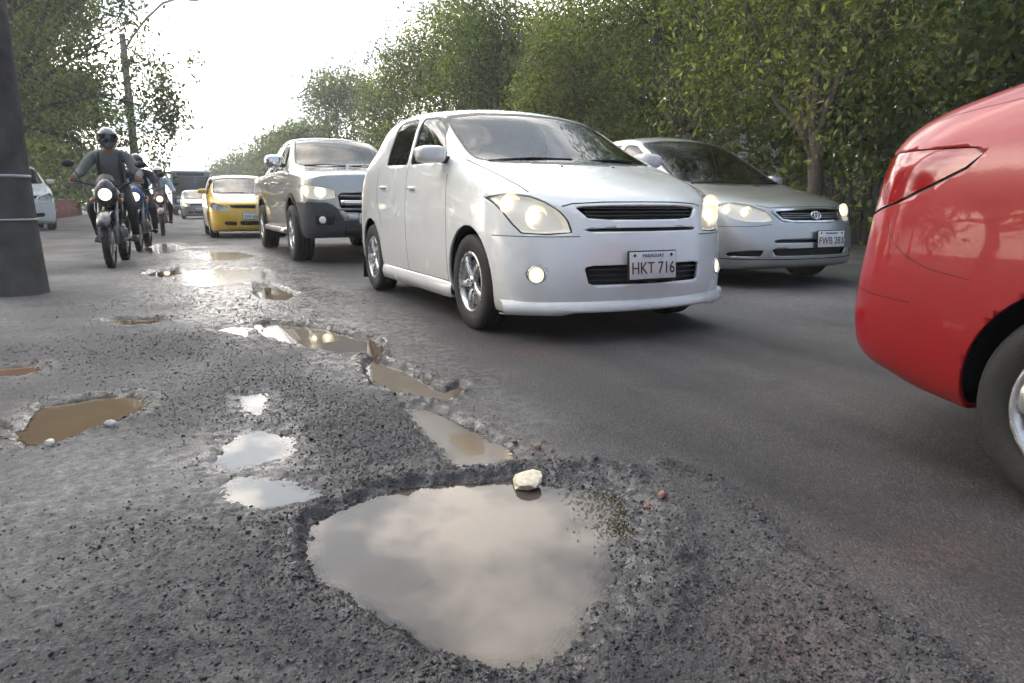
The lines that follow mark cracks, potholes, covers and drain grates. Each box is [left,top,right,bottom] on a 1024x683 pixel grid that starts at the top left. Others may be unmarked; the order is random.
pothole [139,267,182,277]
pothole [449,433,485,456]
pothole [360,352,472,401]
pothole [250,282,301,301]
pothole [0,361,48,376]
pothole [253,318,389,358]
pothole [288,465,675,677]
pothole [99,315,168,326]
pothole [4,389,157,449]
